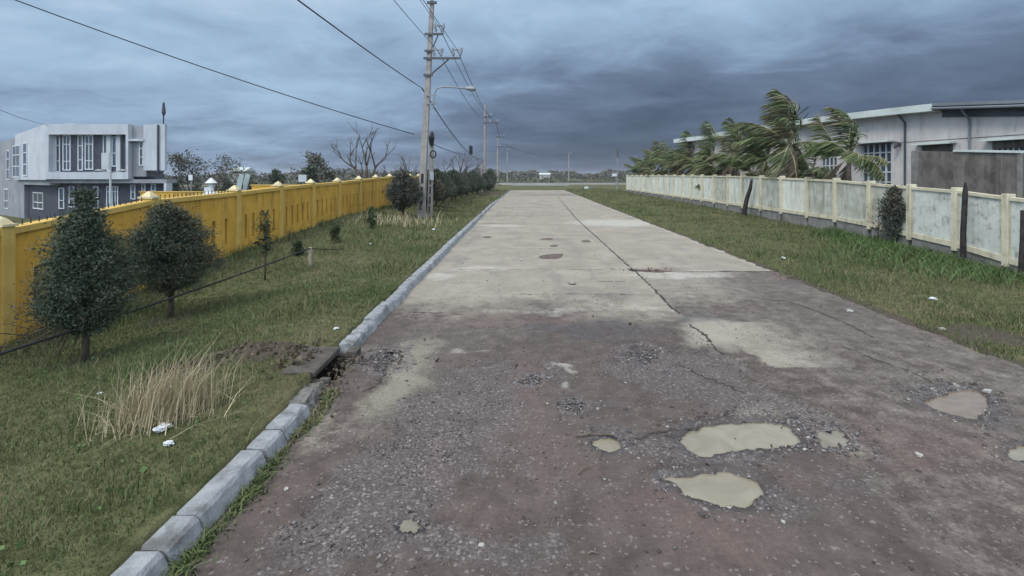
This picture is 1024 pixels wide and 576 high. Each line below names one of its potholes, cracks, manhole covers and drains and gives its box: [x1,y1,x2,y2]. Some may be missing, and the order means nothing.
pothole [645,461,786,520]
pothole [615,340,671,368]
pothole [798,425,866,454]
pothole [664,413,822,464]
pothole [556,396,594,416]
pothole [907,383,1009,427]
pothole [580,429,633,459]
pothole [513,371,548,389]
pothole [384,510,432,543]
